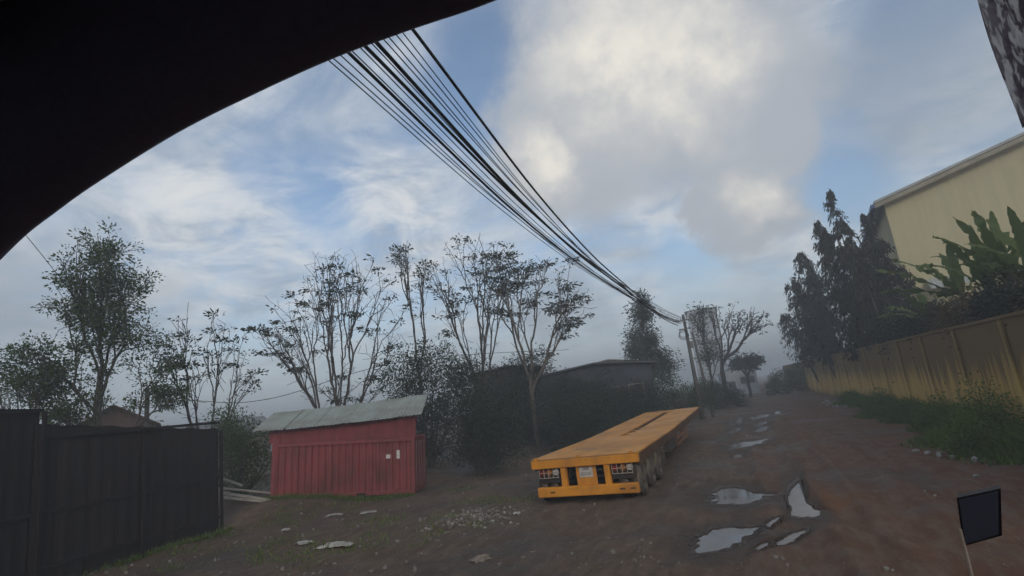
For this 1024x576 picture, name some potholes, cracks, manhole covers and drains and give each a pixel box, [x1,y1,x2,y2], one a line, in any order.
pothole [770,527,811,547]
pothole [762,514,783,530]
pothole [725,437,773,450]
pothole [687,519,772,559]
pothole [785,477,828,521]
pothole [703,485,790,507]
